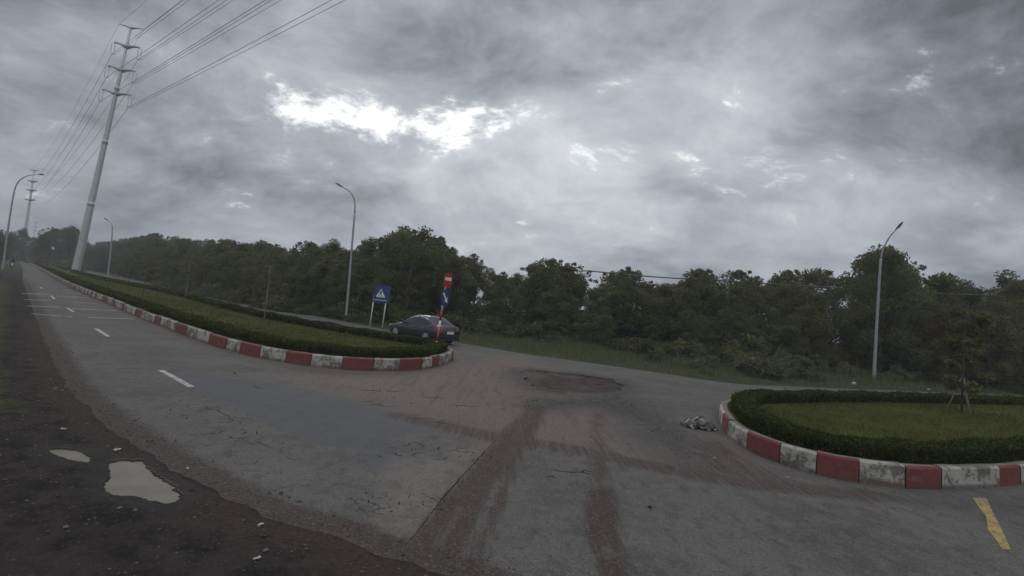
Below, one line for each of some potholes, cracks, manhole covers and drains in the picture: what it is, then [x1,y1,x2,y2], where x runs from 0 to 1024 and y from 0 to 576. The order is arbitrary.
pothole [99,459,184,505]
crack [346,443,491,548]
pothole [46,447,92,462]
crack [170,404,294,472]
